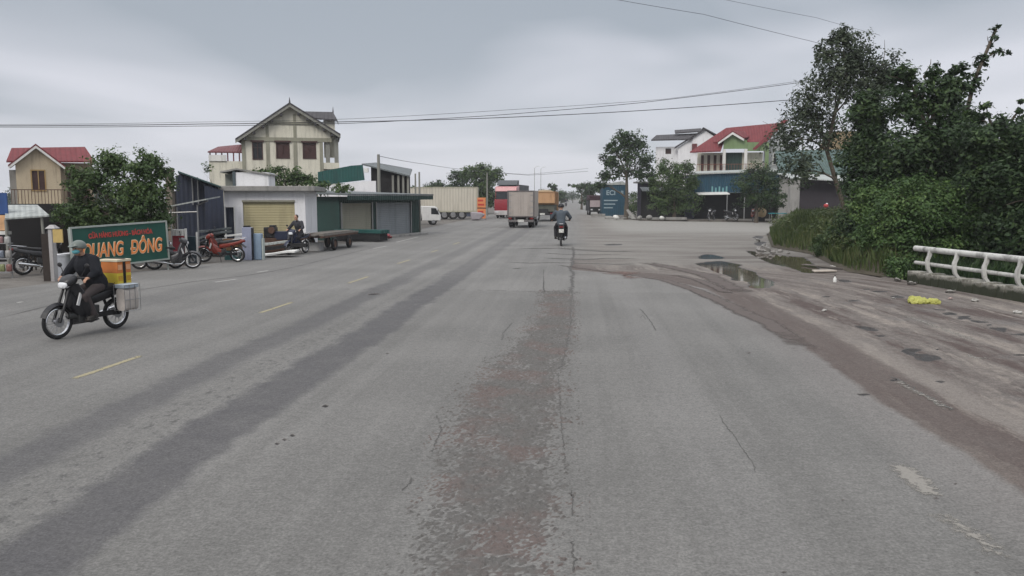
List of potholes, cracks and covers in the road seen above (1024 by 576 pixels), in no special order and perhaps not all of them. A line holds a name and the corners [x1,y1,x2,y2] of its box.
pothole [900,347,942,362]
crack [558,247,575,369]
crack [891,377,953,410]
